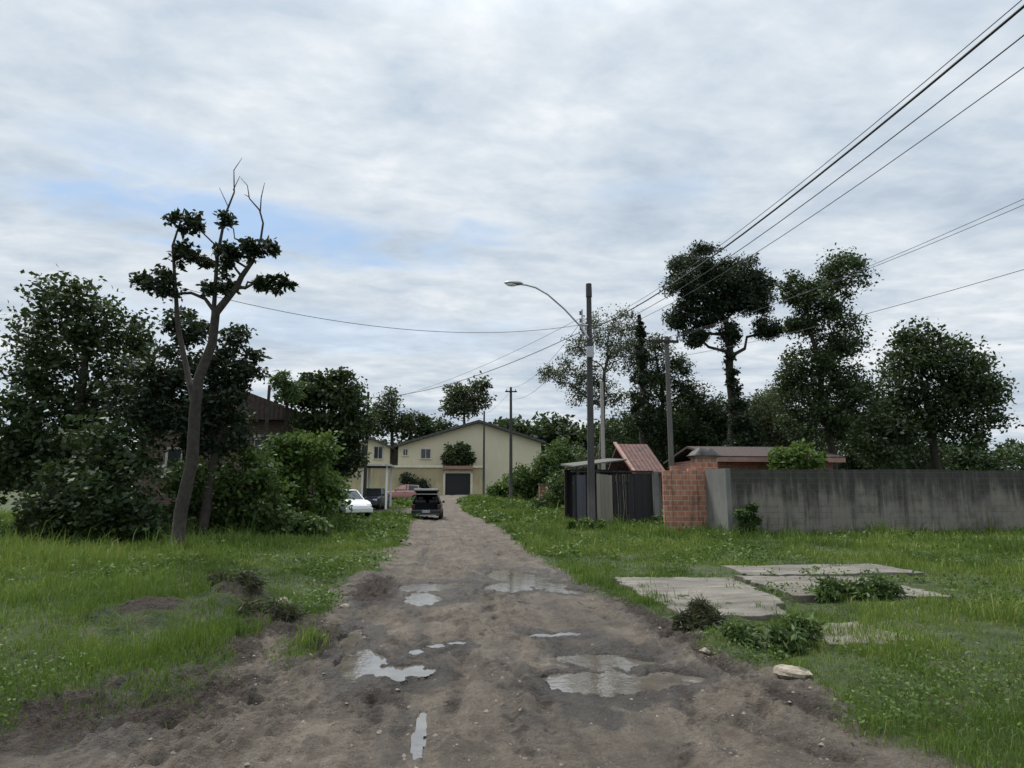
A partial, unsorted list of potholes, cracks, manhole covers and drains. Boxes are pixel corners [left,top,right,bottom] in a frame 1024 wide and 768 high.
pothole [475,568,590,594]
pothole [394,580,473,607]
pothole [533,651,709,698]
pothole [325,624,439,686]
pothole [409,707,428,761]
